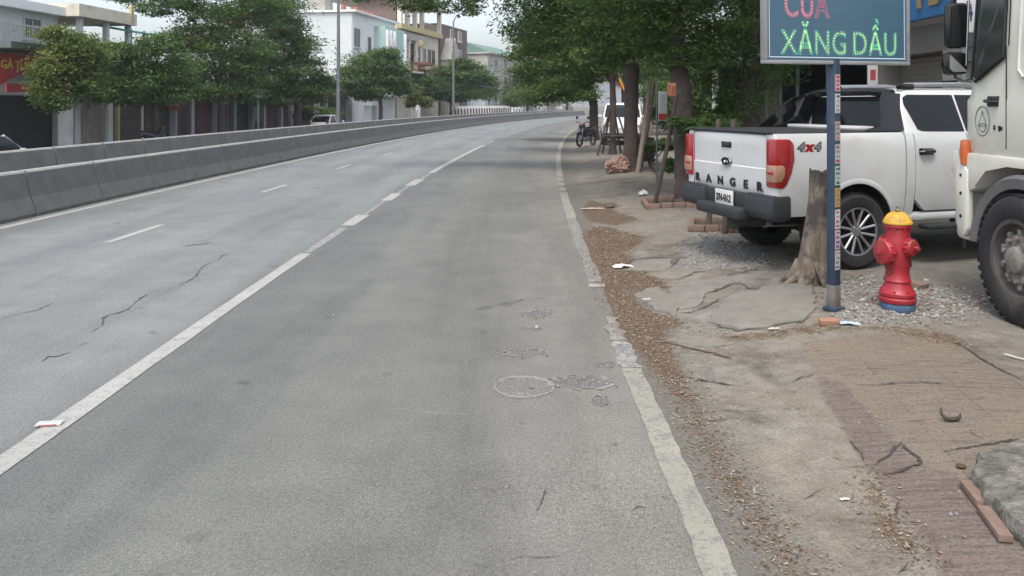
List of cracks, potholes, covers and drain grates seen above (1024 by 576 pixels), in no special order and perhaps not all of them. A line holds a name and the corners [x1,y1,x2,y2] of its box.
manhole cover [494,375,556,398]
crack [624,256,810,358]
crack [883,442,923,474]
crack [955,342,1022,380]
crack [45,294,149,358]
